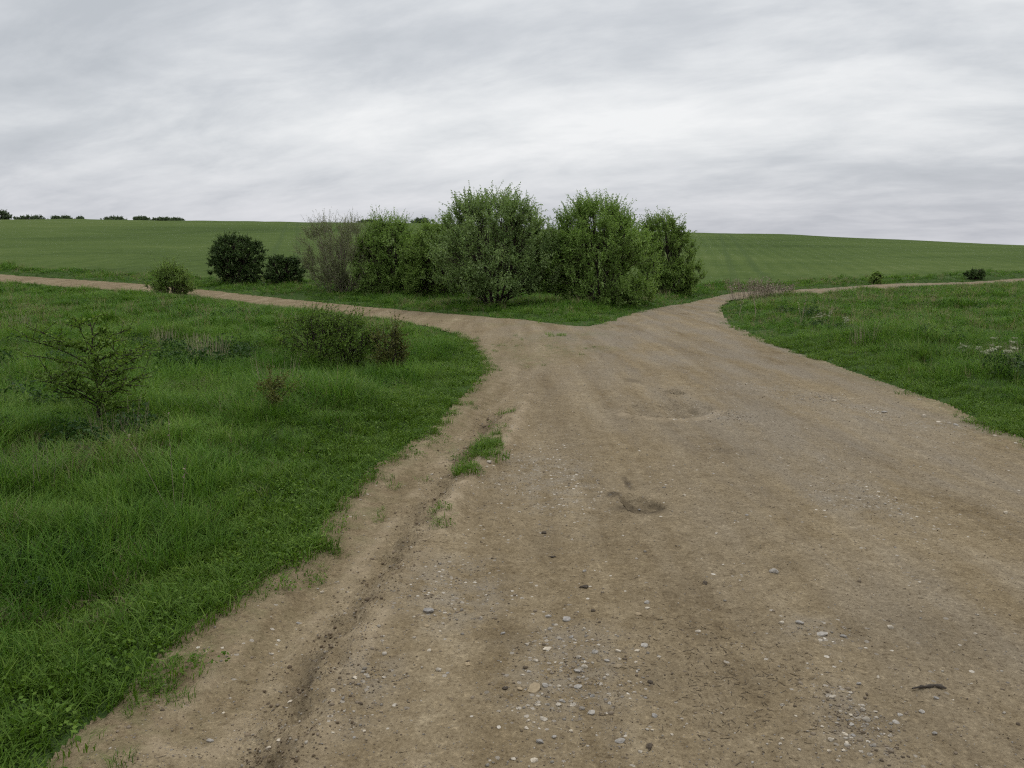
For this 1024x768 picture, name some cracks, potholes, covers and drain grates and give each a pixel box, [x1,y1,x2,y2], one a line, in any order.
pothole [621,401,716,419]
pothole [619,493,665,514]
